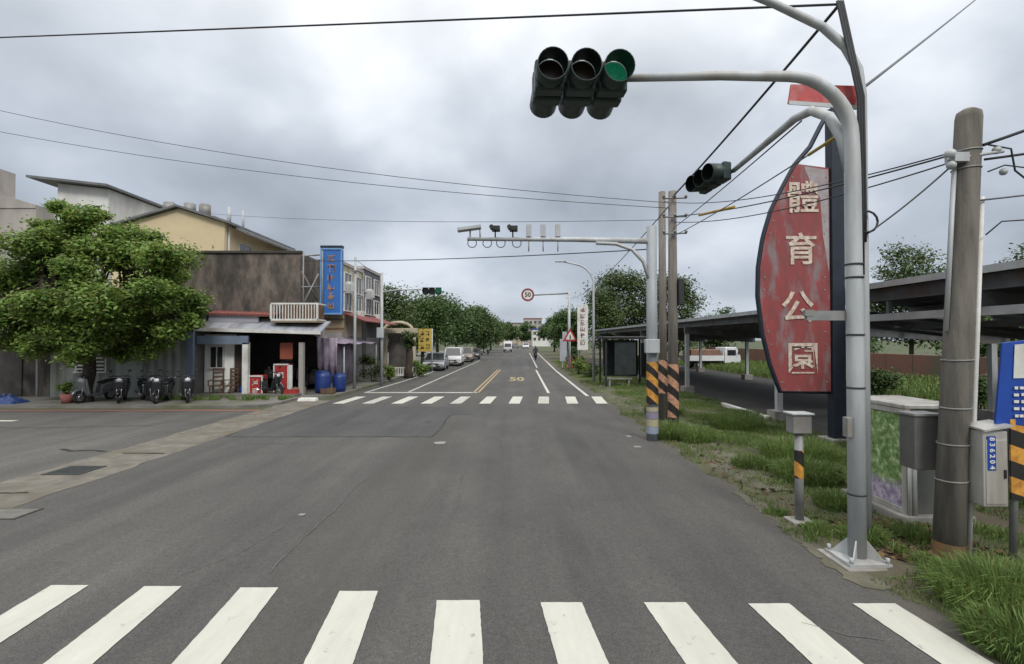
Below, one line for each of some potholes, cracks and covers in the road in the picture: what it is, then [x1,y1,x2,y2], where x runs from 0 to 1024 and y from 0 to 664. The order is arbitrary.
manhole cover [41,466,106,475]
manhole cover [0,508,44,520]
